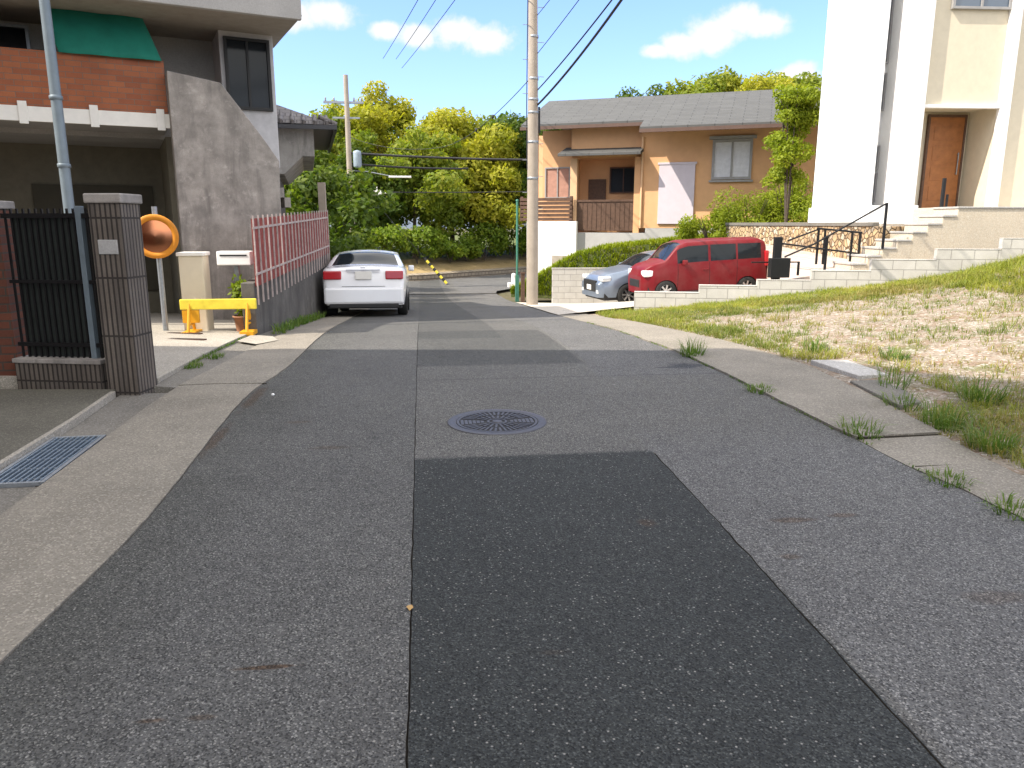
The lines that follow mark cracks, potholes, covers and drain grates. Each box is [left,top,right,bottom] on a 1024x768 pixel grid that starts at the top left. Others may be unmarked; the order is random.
manhole cover [447,409,547,435]
drain grate [0,435,106,488]
